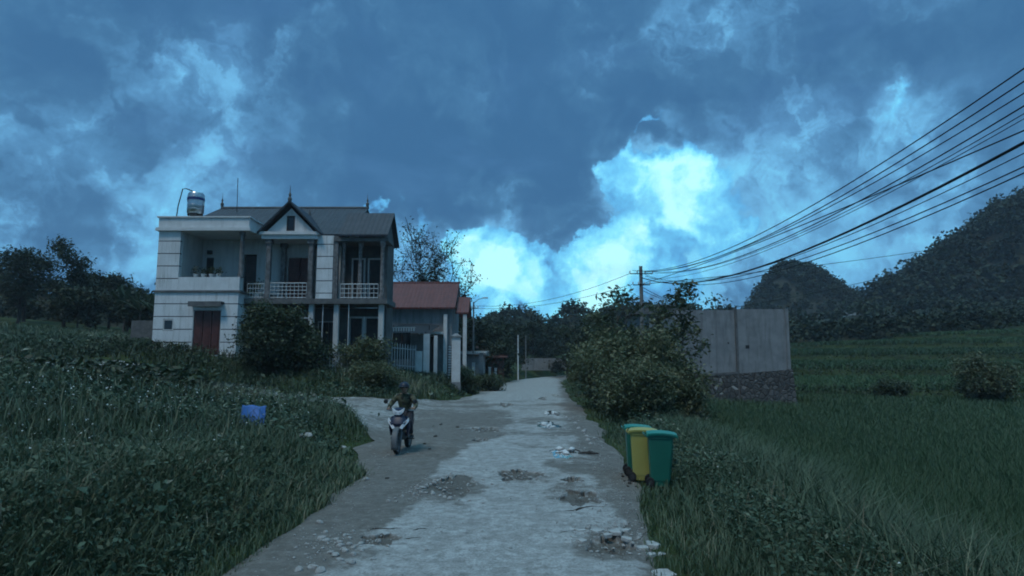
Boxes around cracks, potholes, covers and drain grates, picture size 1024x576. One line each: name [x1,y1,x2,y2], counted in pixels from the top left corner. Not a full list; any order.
pothole [559,489,603,507]
pothole [498,469,545,481]
pothole [416,474,478,498]
pothole [359,533,402,546]
pothole [584,532,639,556]
